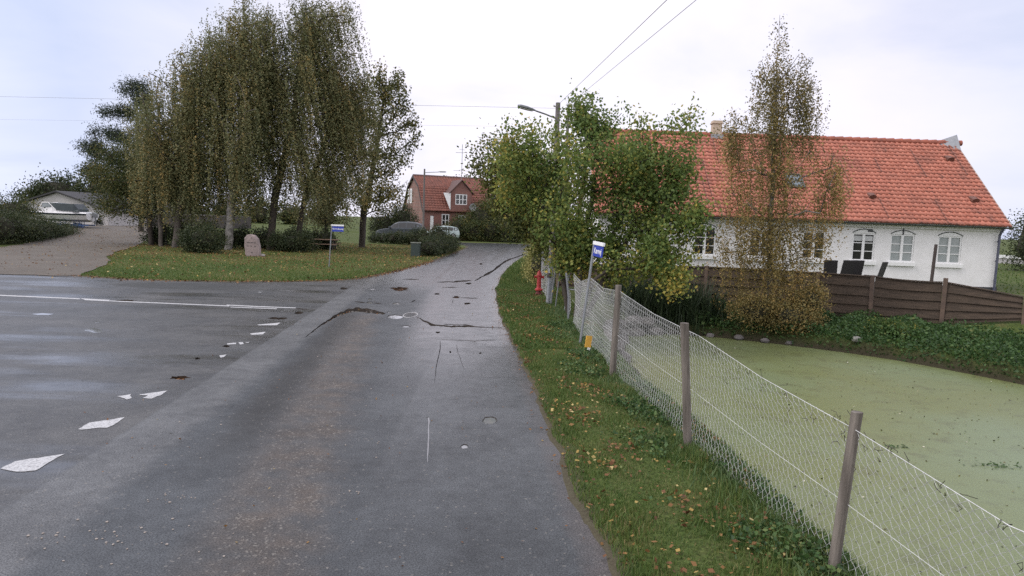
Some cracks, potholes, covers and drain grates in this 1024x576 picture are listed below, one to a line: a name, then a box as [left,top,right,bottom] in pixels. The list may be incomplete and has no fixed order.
crack [412,254,525,376]
crack [293,301,385,337]
